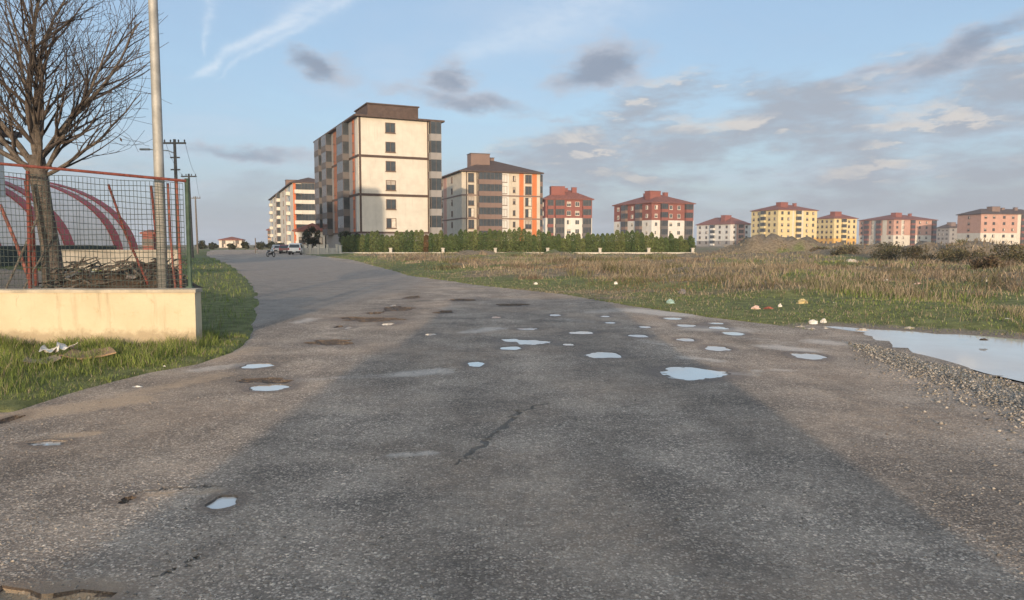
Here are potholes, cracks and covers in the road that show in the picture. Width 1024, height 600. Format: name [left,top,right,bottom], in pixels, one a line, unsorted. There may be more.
pothole [205,494,238,509]
pothole [658,367,731,380]
crack [454,403,548,465]
